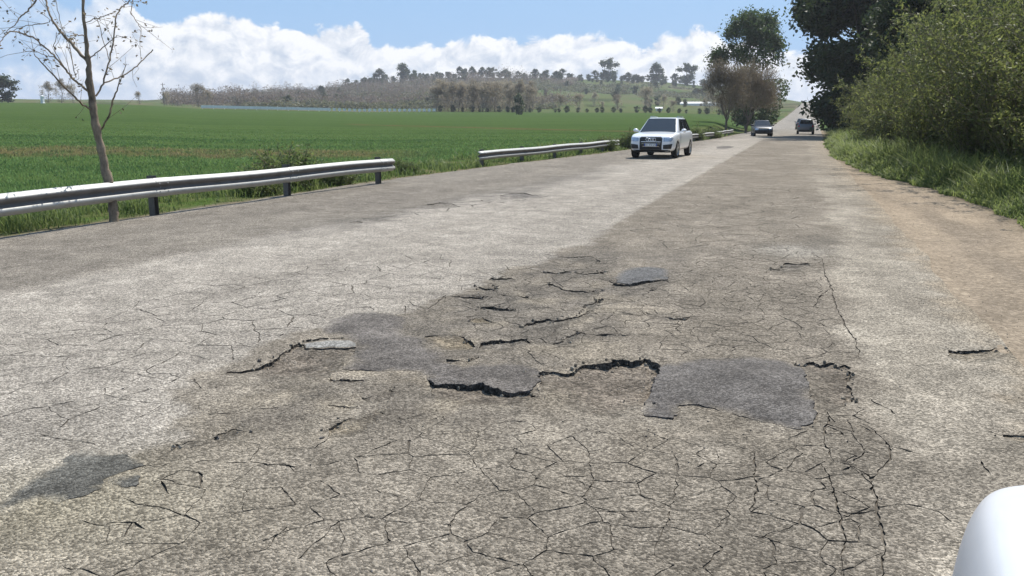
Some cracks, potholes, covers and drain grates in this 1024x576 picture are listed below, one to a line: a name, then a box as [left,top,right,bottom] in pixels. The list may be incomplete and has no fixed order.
pothole [537,359,660,417]
pothole [428,381,539,406]
crack [0,254,950,576]
crack [455,187,861,365]
